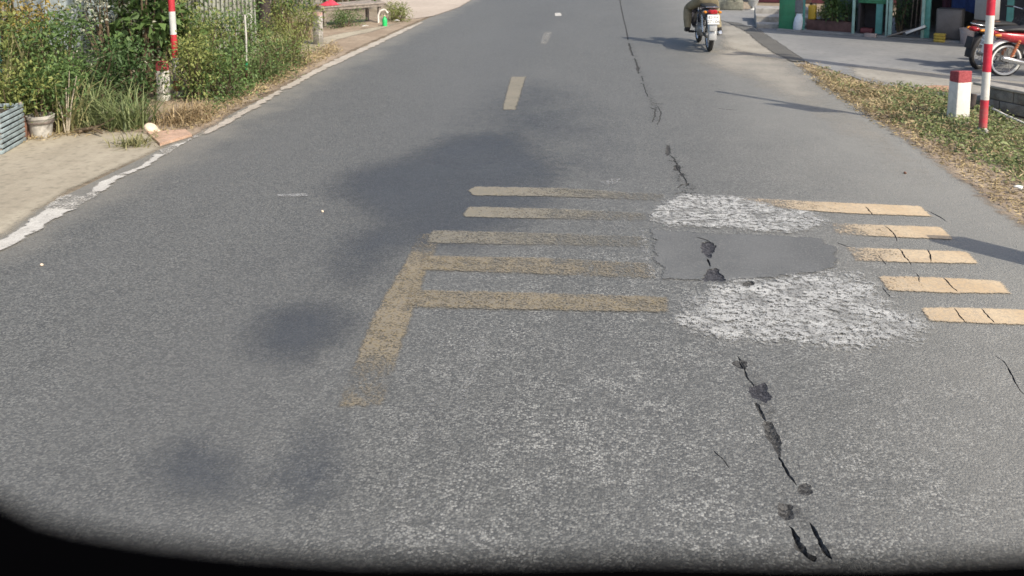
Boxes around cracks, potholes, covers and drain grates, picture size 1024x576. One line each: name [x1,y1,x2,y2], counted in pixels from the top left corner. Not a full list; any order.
pothole [702,269,726,282]
pothole [700,242,716,258]
crack [789,522,832,558]
crack [778,457,797,486]
crack [669,155,695,196]
crack [619,0,662,125]
crack [737,356,766,421]
